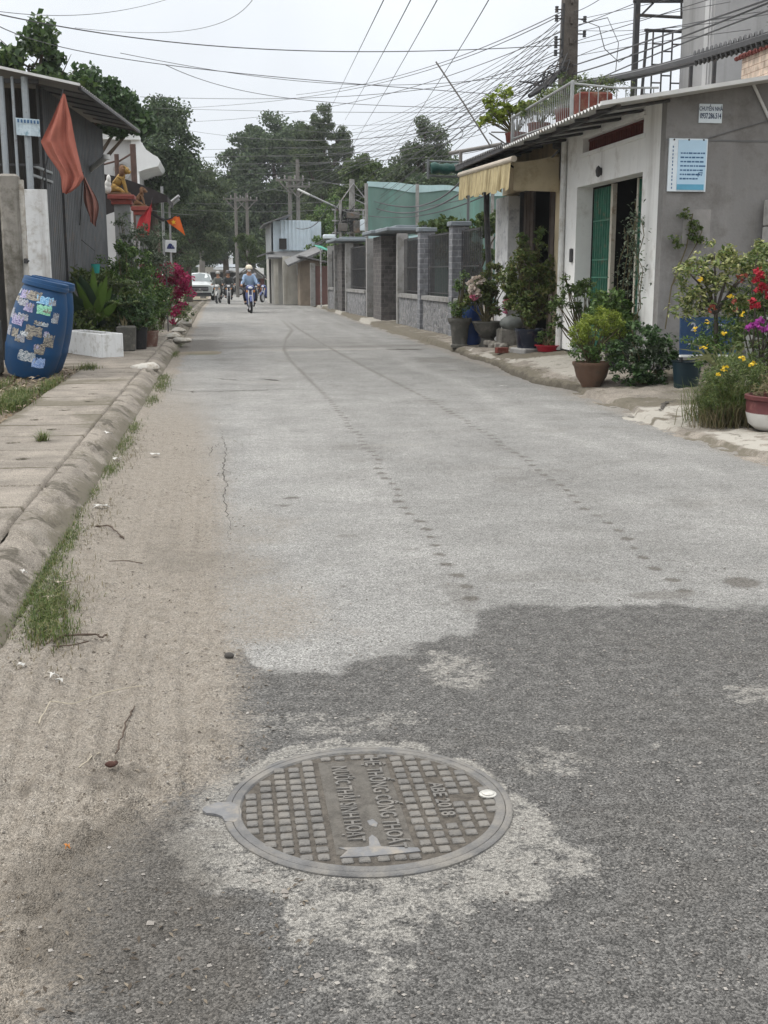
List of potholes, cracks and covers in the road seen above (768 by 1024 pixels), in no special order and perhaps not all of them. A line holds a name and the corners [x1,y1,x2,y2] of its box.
crack [209,434,231,540]
manhole cover [202,747,513,879]
